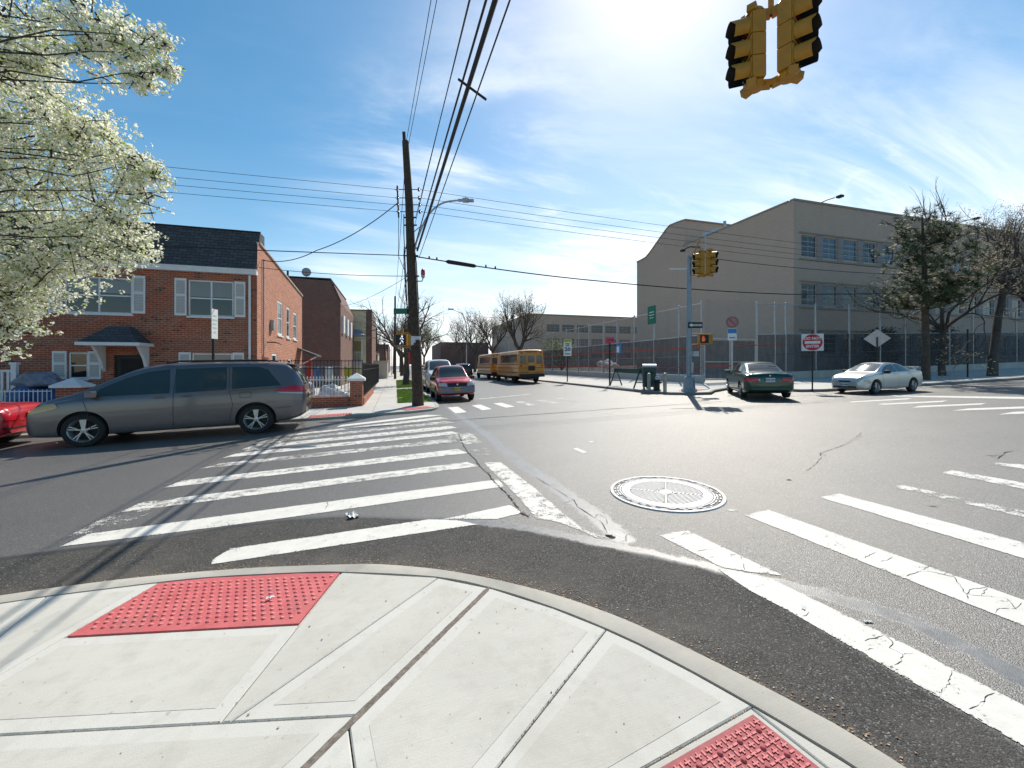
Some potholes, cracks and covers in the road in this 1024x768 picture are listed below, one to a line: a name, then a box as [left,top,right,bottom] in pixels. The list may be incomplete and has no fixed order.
crack [443,401,755,518]
crack [865,554,1021,611]
manhole cover [610,476,727,513]
